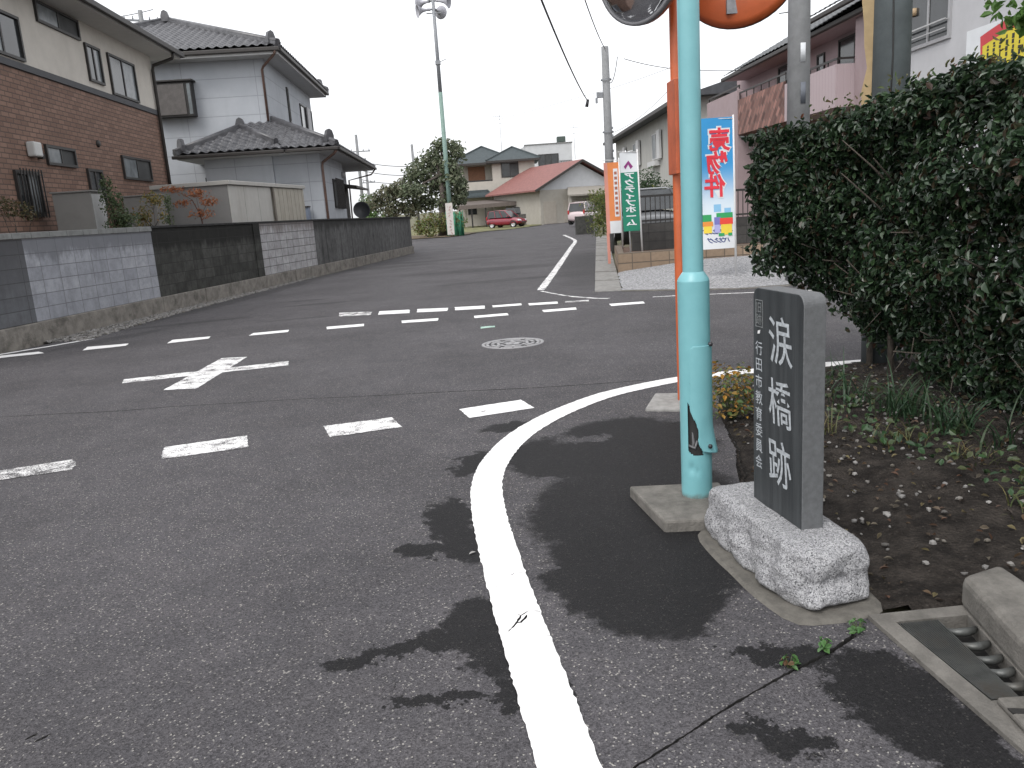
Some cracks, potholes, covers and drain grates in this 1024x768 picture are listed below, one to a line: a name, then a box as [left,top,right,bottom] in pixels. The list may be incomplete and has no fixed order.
manhole cover [482,338,544,349]
drain grate [868,567,1024,756]
